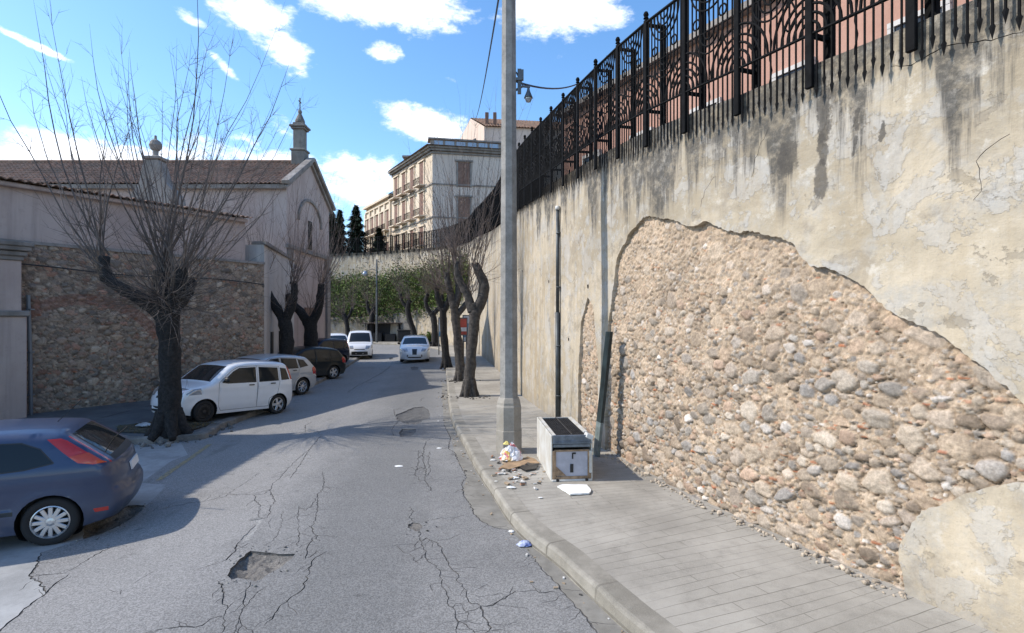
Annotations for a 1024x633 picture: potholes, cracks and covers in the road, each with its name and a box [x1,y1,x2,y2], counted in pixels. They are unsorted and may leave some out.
crack [371,425,535,633]
crack [0,545,127,631]
pothole [227,551,295,581]
pothole [399,429,416,437]
crack [152,422,338,633]
